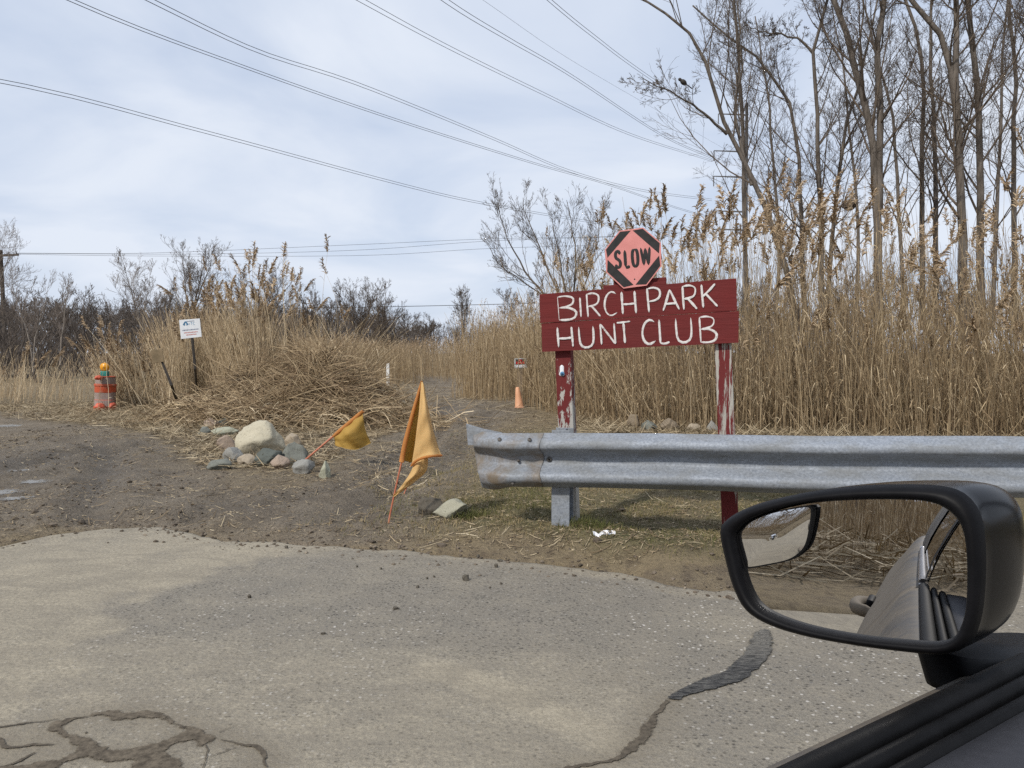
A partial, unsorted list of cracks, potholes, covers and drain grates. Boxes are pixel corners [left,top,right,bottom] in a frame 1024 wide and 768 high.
crack [0,718,57,767]
crack [202,725,267,768]
